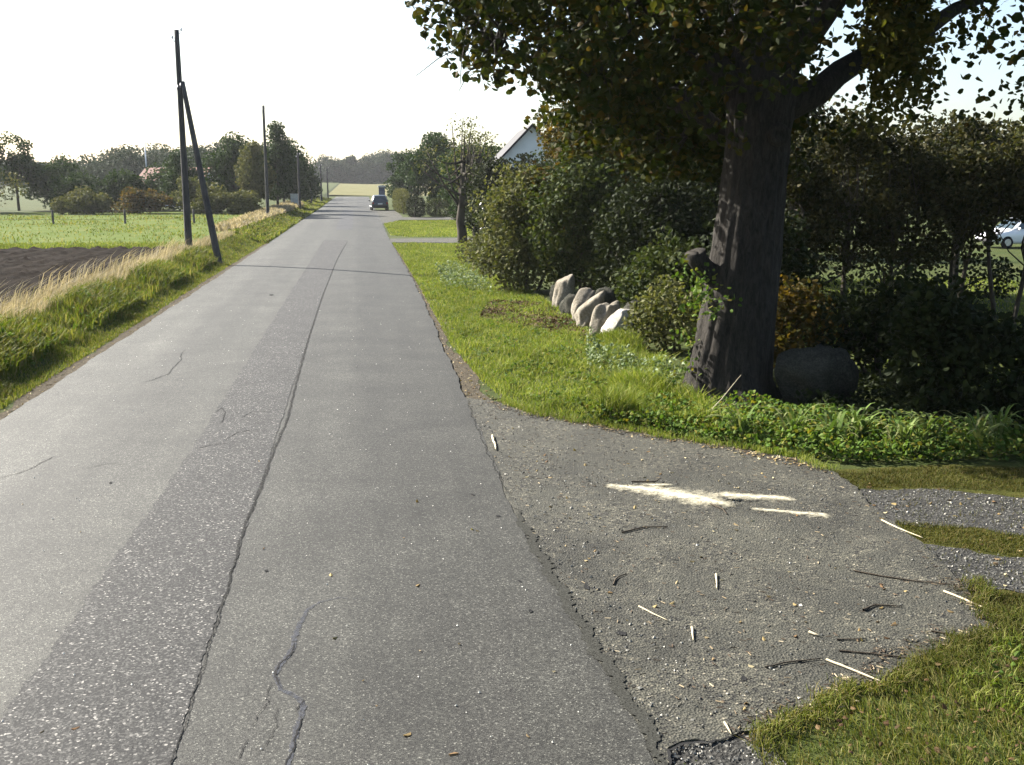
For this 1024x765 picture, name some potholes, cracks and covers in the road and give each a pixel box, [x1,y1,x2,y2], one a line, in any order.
crack [239,682,278,757]
